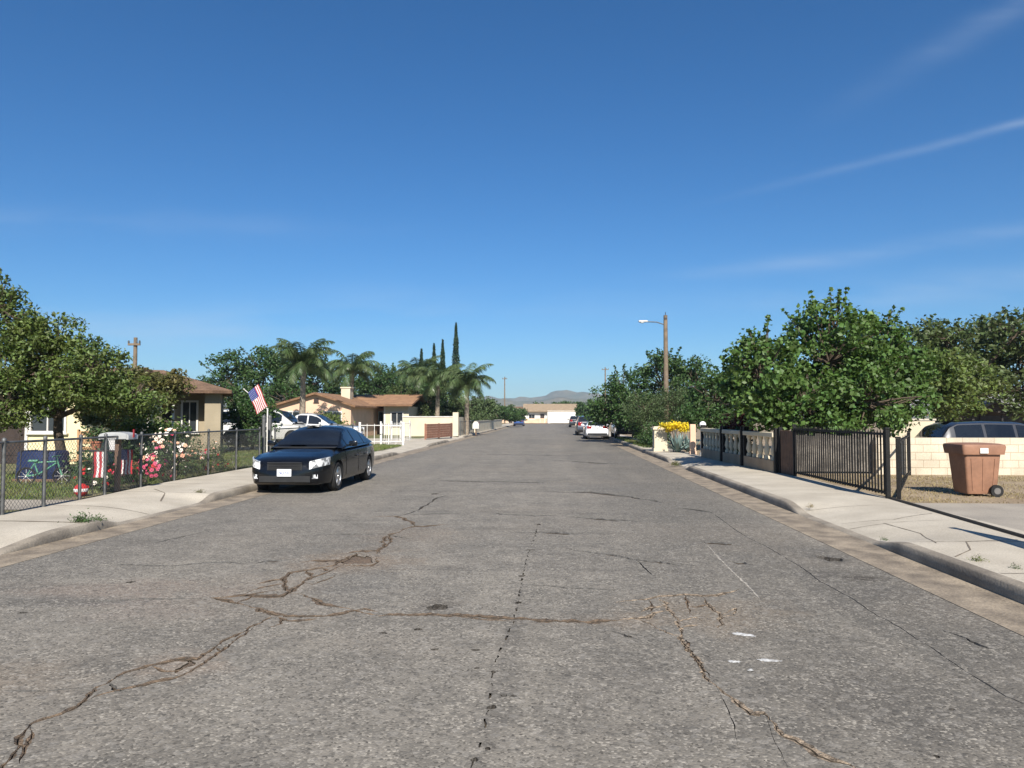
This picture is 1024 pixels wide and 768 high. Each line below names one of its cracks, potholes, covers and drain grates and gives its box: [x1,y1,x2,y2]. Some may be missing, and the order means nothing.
crack [0,480,856,768]
crack [940,629,1010,651]
